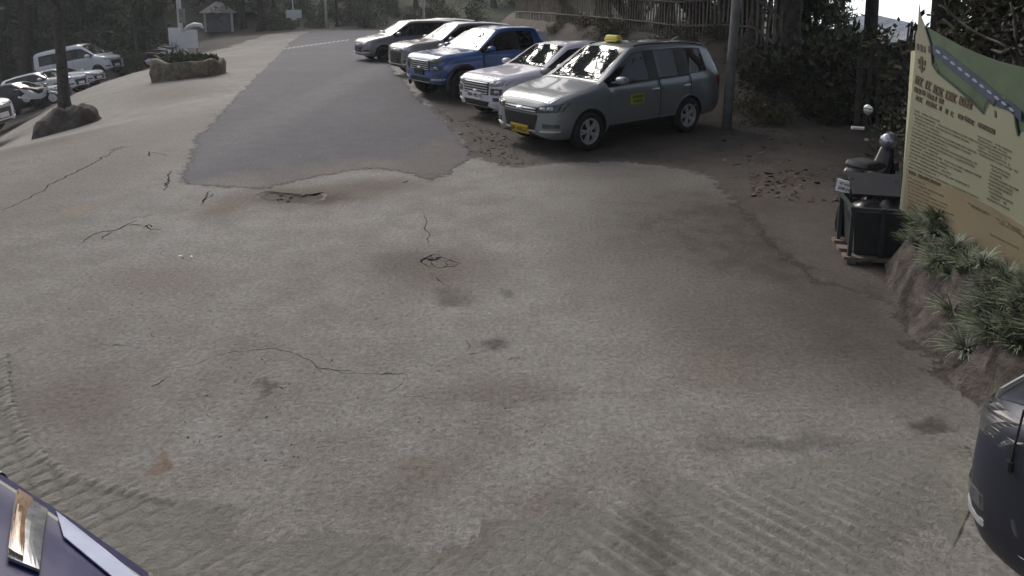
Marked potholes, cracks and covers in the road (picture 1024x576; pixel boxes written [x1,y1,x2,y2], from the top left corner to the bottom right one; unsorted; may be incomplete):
pothole [255,191,328,204]
crack [2,146,125,210]
crack [417,211,460,288]
crack [83,344,432,399]
crack [78,215,161,245]
